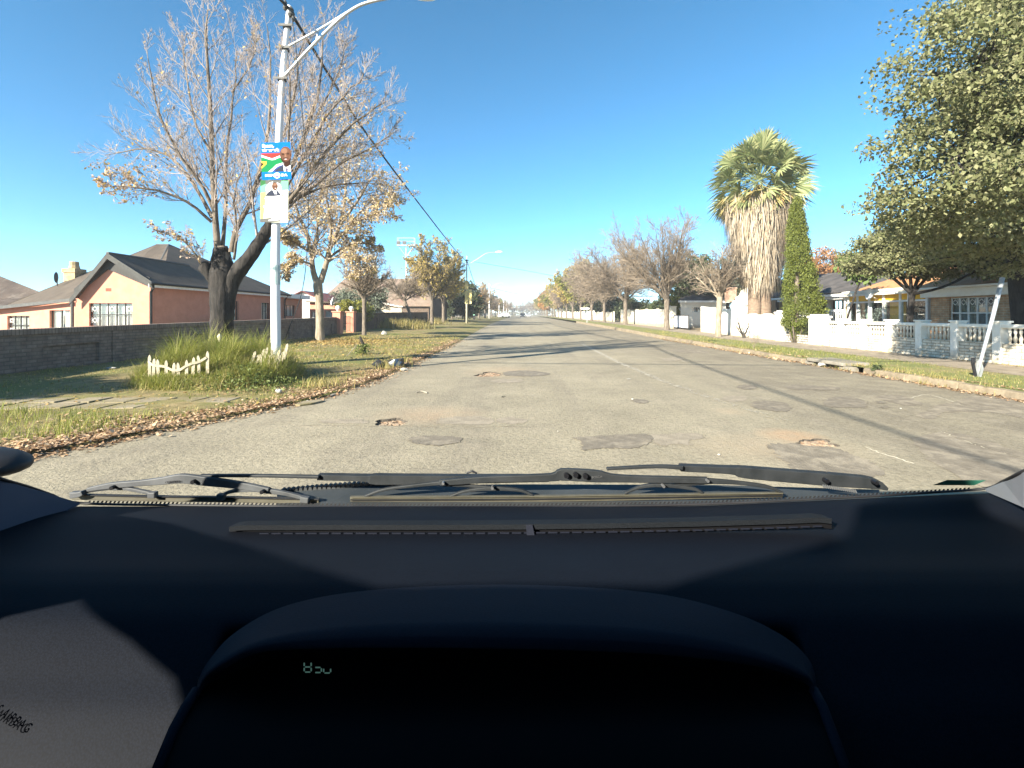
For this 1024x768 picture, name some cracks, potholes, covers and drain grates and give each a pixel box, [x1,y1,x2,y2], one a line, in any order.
pothole [375,418,408,426]
pothole [797,438,840,447]
